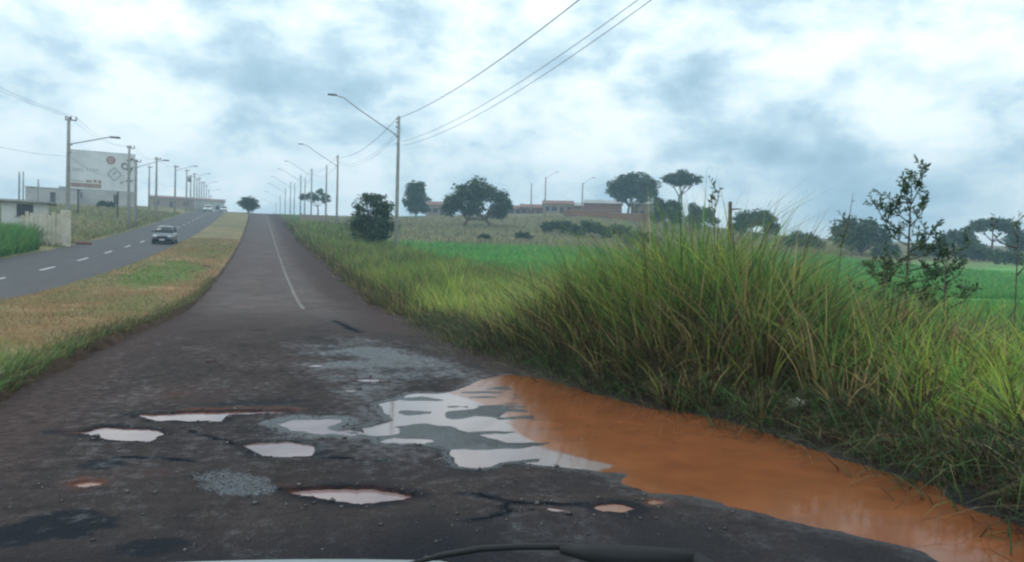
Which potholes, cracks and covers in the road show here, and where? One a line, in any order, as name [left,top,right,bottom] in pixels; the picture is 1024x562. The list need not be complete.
pothole [70,426,166,442]
pothole [593,502,635,512]
pothole [136,410,286,421]
crack [461,492,579,521]
pothole [348,385,572,469]
crack [336,321,362,333]
pothole [263,416,368,437]
pothole [69,479,106,487]
pothole [276,485,417,504]
pothole [240,440,318,457]
